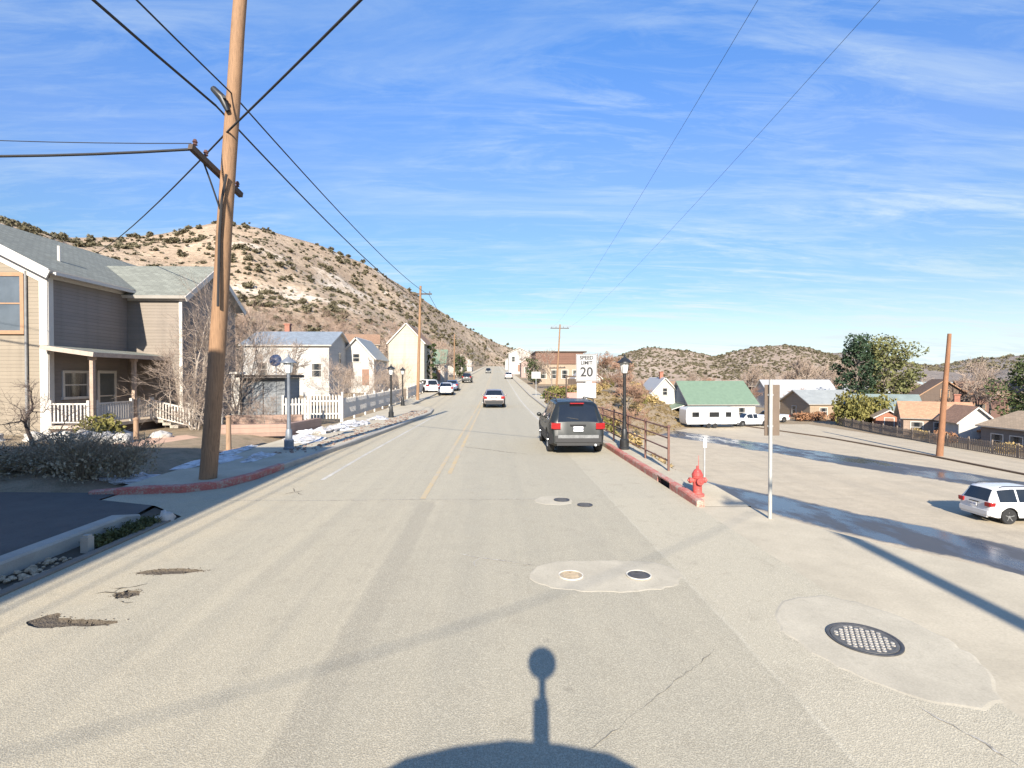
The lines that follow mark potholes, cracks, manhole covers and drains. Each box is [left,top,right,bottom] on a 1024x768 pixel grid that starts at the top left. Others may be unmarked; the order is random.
utility cover [626,570,652,580]
crack [588,651,713,750]
pothole [26,612,129,629]
crack [920,707,1017,764]
pothole [110,589,142,599]
pothole [136,567,208,576]
